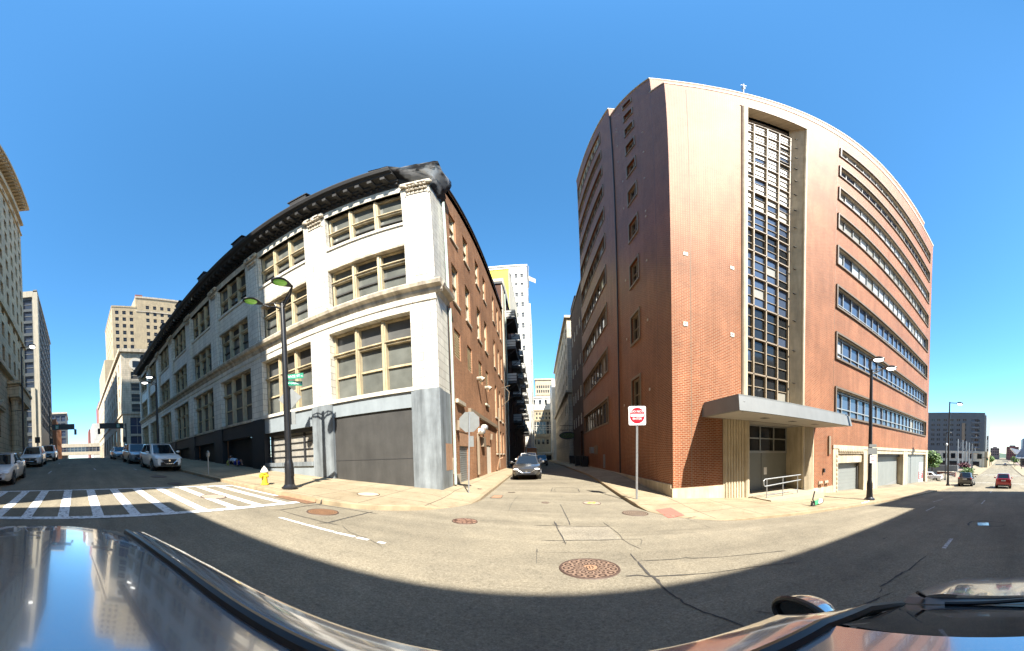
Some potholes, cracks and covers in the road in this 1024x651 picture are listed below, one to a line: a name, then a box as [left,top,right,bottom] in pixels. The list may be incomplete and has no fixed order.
crack [603,522,793,626]
crack [854,556,926,607]
manhole cover [559,558,621,580]
